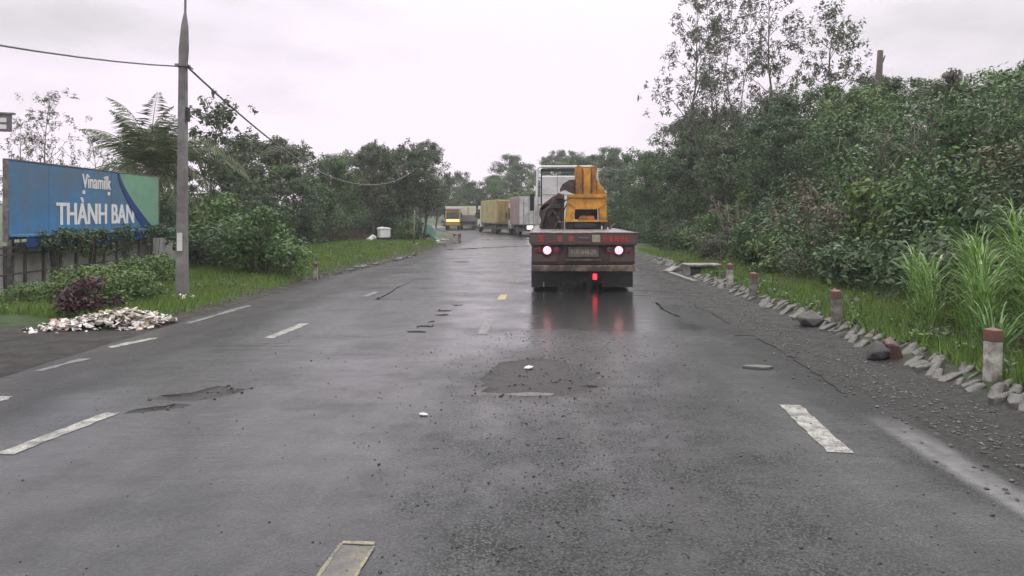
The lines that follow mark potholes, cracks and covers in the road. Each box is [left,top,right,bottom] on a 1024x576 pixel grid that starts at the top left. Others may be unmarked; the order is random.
pothole [124,404,190,414]
crack [757,339,846,394]
pothole [146,384,253,402]
